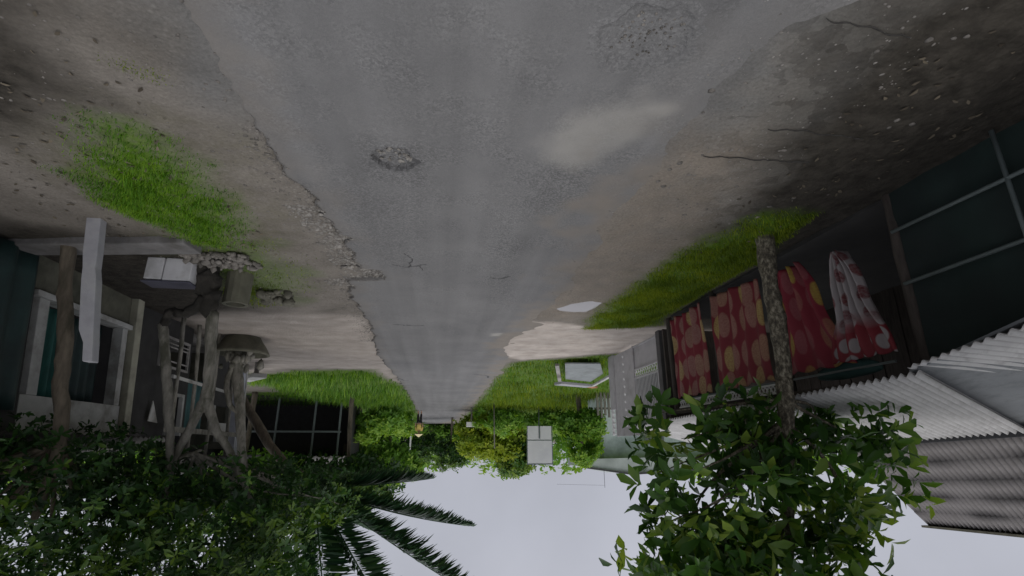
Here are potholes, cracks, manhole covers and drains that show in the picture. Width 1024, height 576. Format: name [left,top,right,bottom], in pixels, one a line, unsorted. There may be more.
crack [827,18,911,38]
pothole [365,144,427,174]
crack [703,129,864,163]
crack [395,254,427,270]
